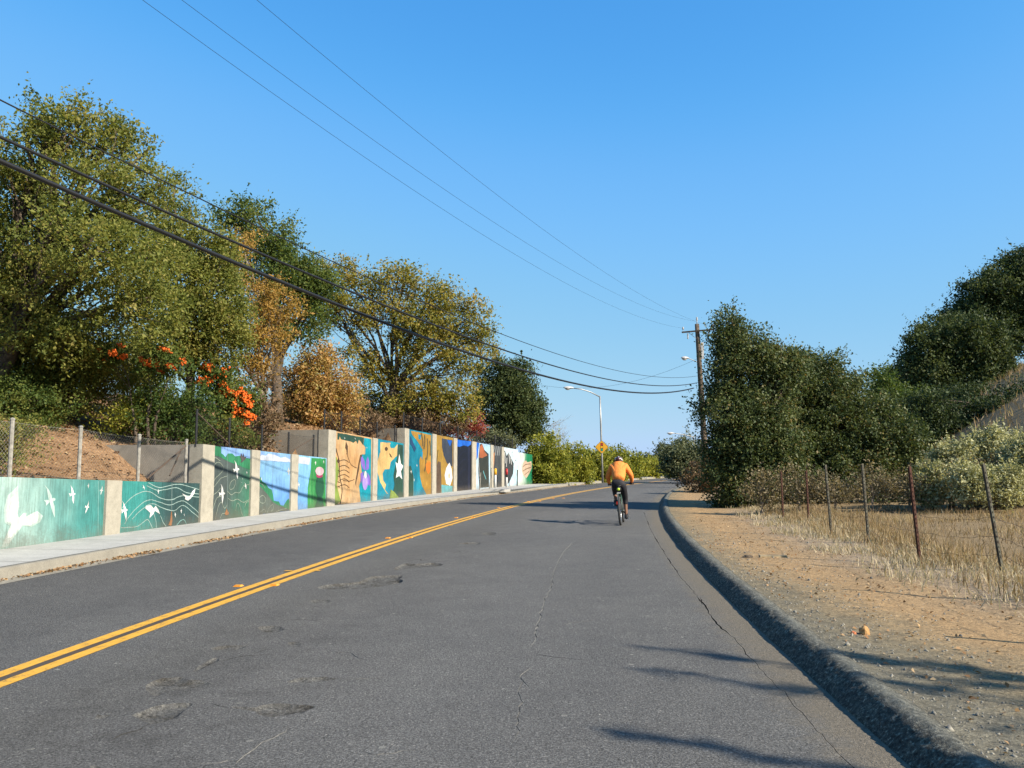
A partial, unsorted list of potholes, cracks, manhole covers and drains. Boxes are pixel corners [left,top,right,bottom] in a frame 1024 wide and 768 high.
crack [513,547,581,742]
pothole [131,703,193,724]
crack [644,514,854,768]
pothole [193,658,219,672]
pothole [317,575,403,590]
pothole [232,703,316,717]
pothole [146,677,210,696]
